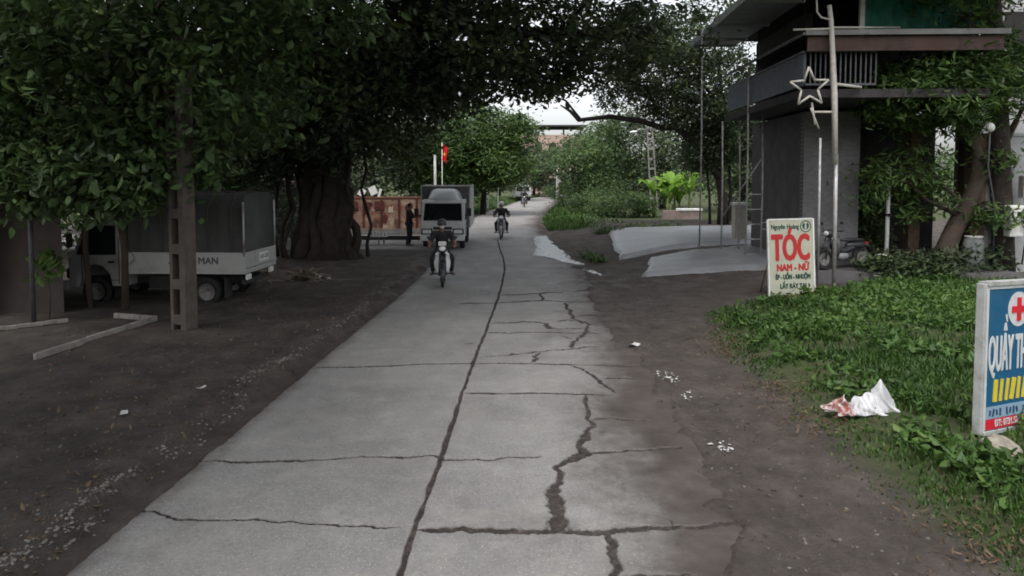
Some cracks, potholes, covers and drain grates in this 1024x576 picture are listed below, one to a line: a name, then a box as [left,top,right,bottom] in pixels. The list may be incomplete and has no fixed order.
crack [200,290,736,576]
crack [142,510,393,529]
